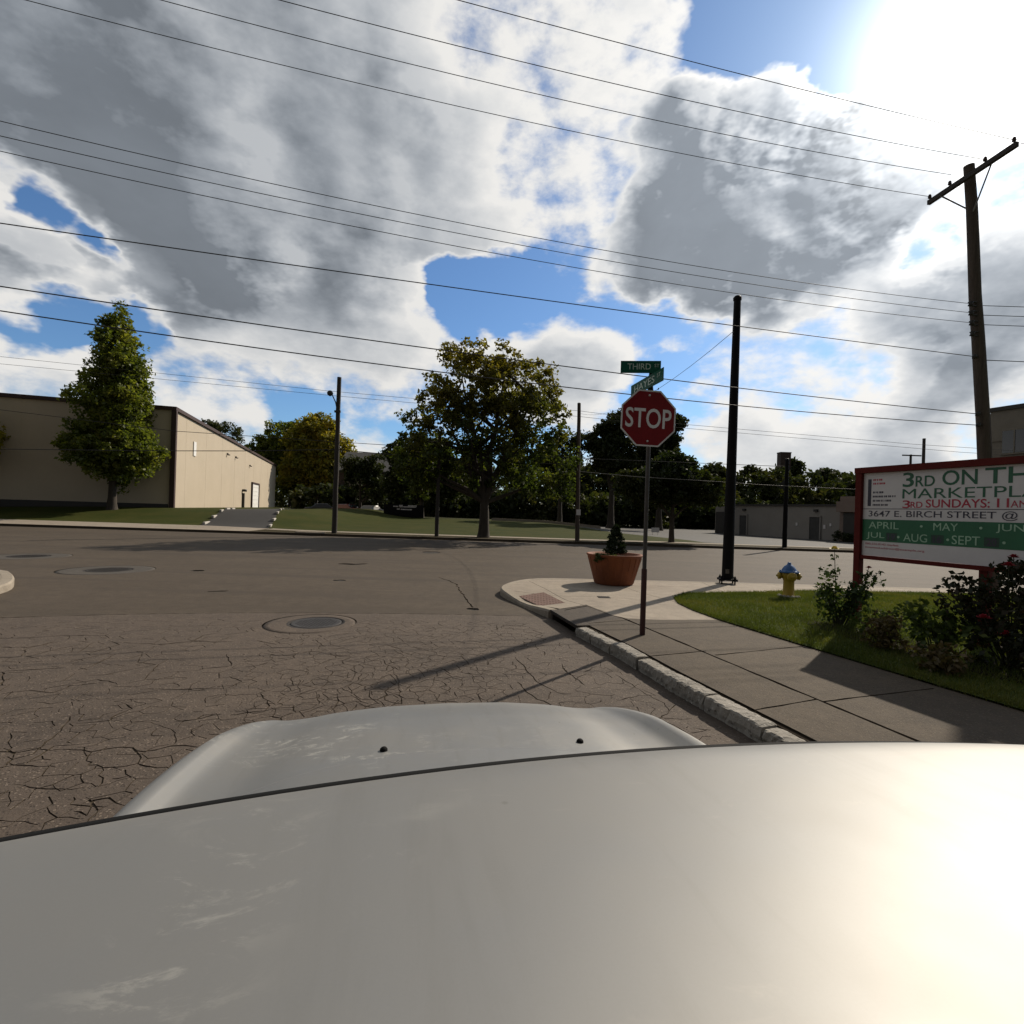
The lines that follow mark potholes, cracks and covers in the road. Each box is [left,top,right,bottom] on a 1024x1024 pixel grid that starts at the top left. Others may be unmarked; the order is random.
crack [0,619,707,740]
manhole cover [262,615,356,634]
manhole cover [54,566,156,575]
crack [0,683,215,832]
